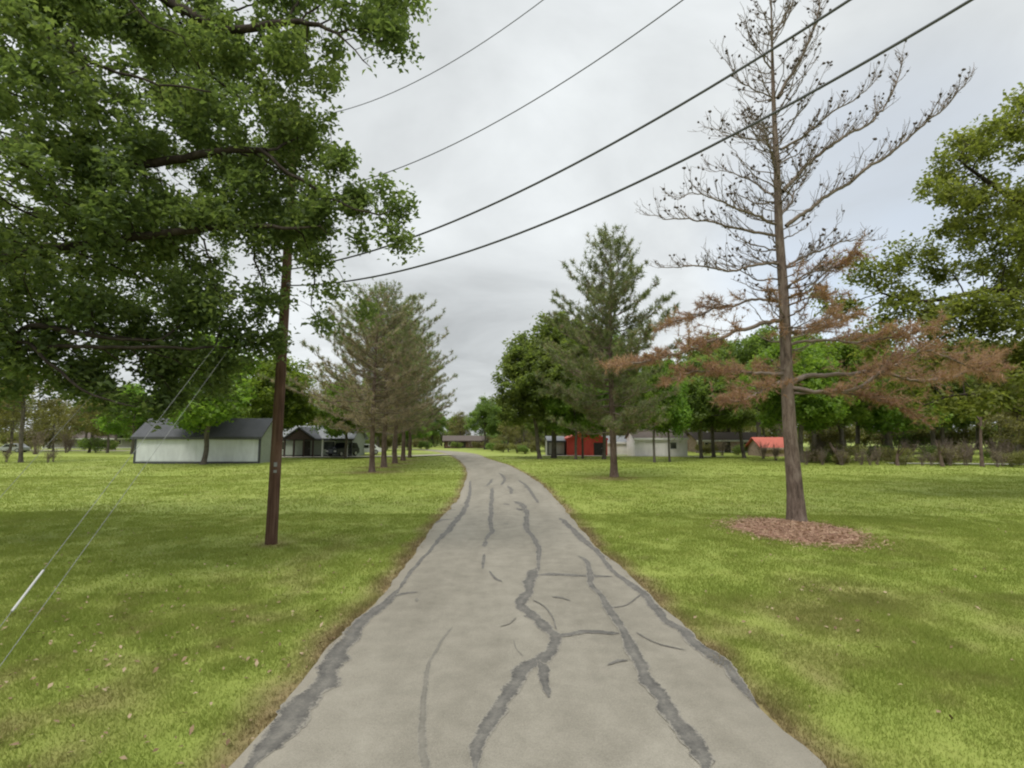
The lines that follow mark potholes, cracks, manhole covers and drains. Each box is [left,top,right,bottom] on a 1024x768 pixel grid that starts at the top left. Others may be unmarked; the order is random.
crack [417,627,452,768]
crack [498,473,539,503]
